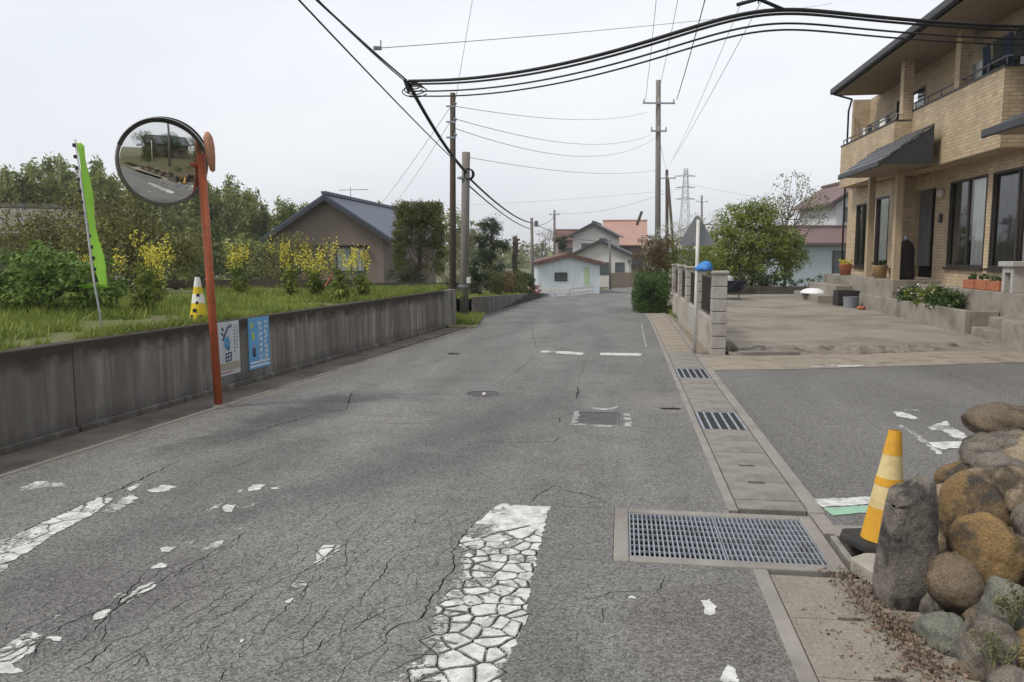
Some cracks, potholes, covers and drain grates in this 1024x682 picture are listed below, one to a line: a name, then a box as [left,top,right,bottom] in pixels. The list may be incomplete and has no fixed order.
crack [107,503,551,682]
crack [531,485,609,506]
drain grate [613,508,850,579]
crack [6,381,425,539]
manhole cover [571,411,622,425]
crack [0,522,261,680]
drain grate [695,411,749,431]
drain grate [675,369,711,378]
